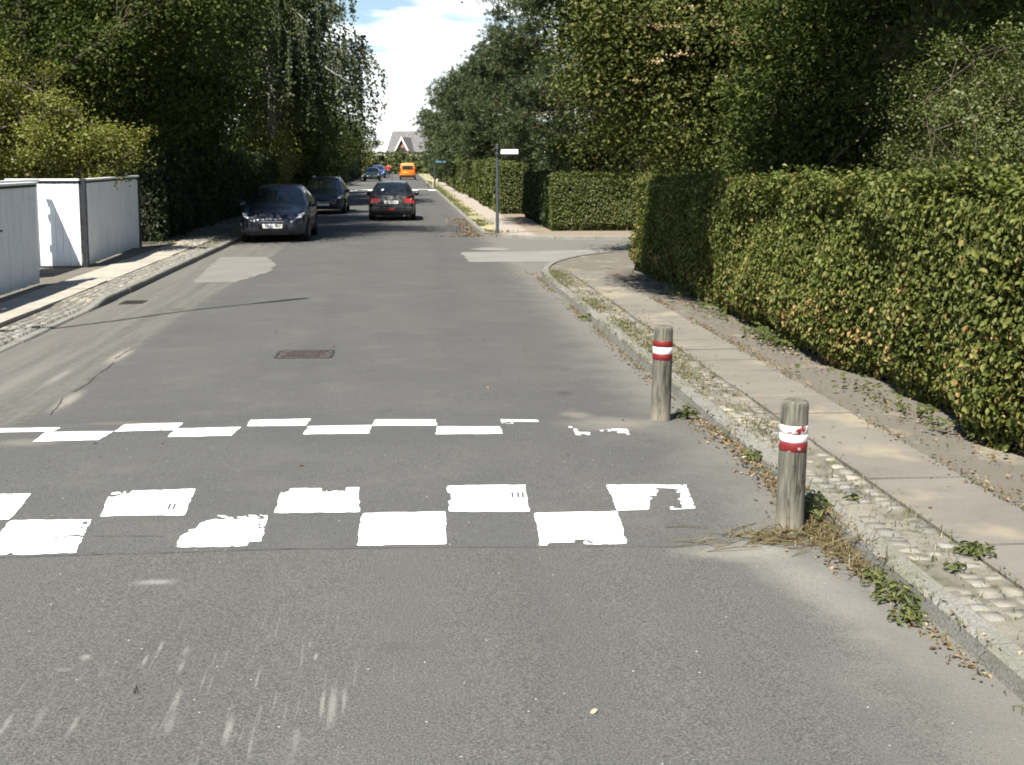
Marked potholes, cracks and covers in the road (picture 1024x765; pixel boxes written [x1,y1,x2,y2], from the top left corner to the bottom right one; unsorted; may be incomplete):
manhole cover [274,350,335,359]
